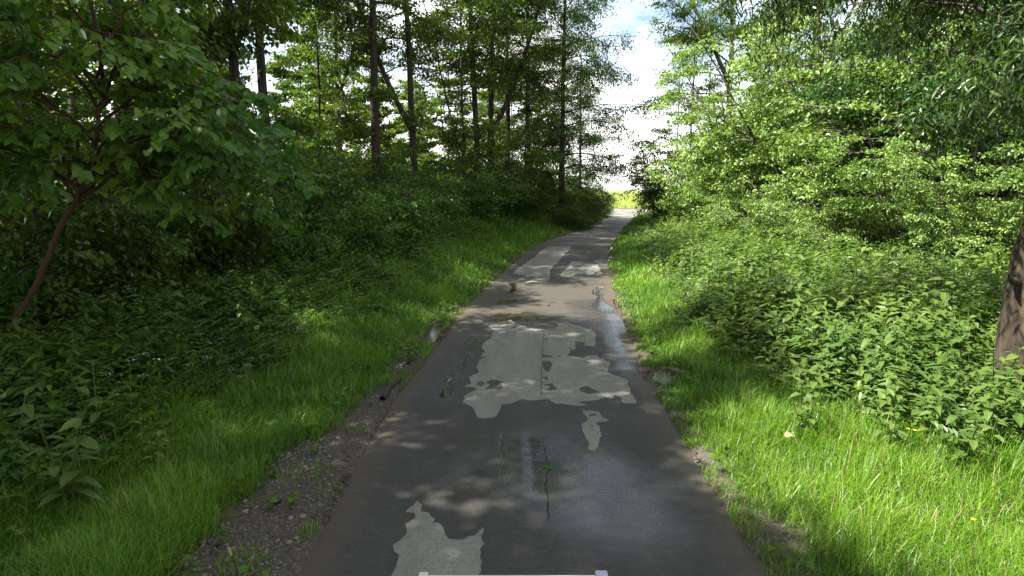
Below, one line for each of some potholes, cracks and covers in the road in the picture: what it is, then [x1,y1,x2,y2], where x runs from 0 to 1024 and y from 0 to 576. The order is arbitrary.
crack [544,448,554,524]
